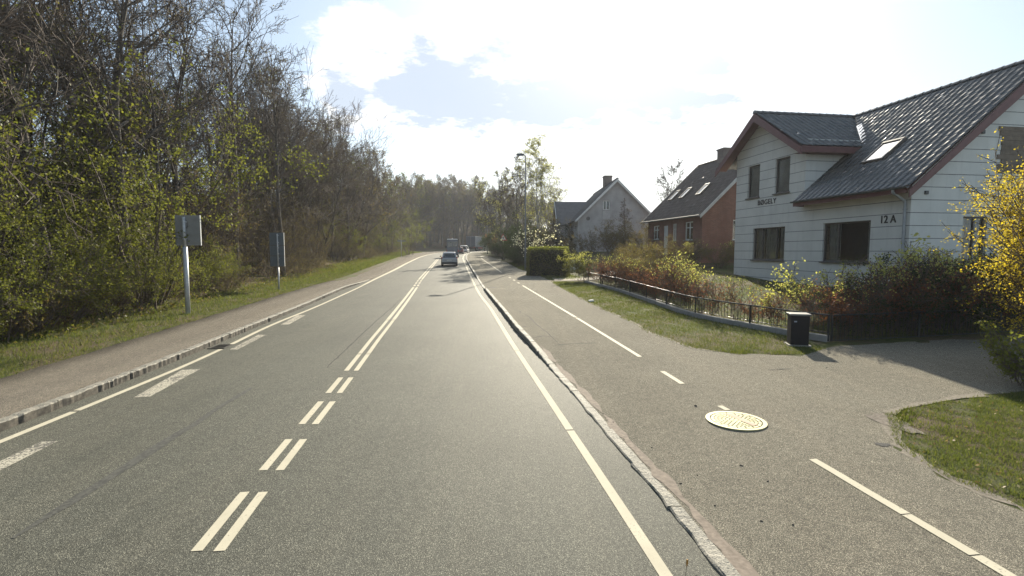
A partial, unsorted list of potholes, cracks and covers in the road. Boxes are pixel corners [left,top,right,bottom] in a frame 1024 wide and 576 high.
manhole cover [705,411,768,432]
